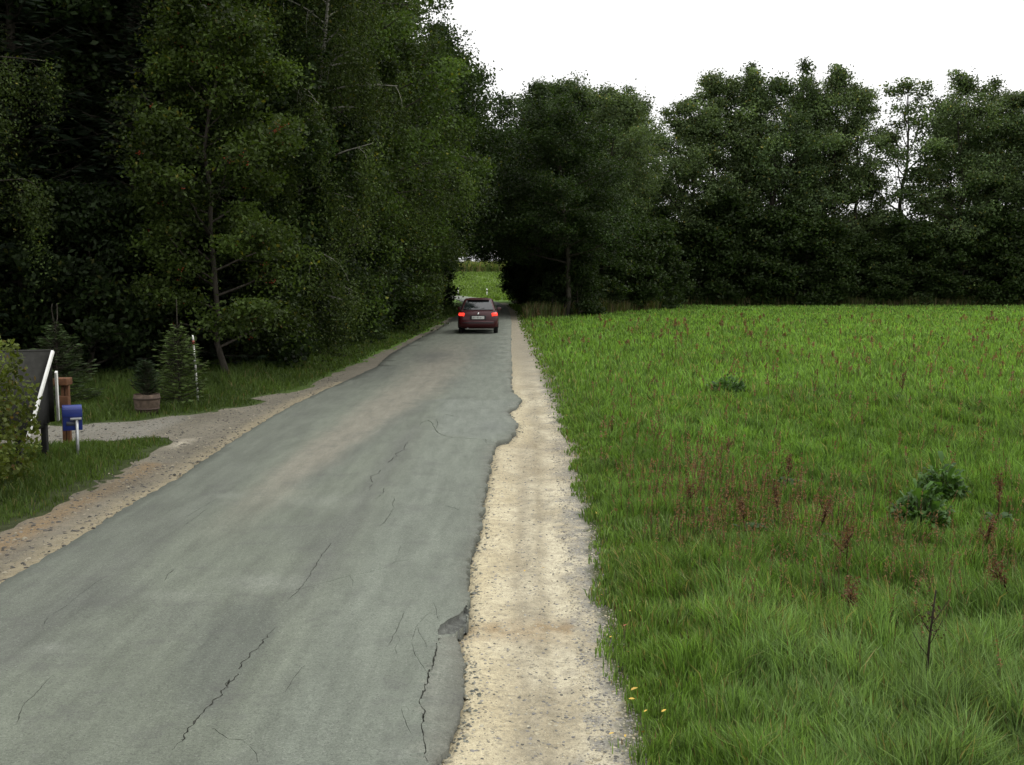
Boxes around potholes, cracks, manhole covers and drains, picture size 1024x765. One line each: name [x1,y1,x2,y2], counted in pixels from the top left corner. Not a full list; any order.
crack [174,628,275,762]
crack [387,607,440,763]
pothole [438,605,468,639]
